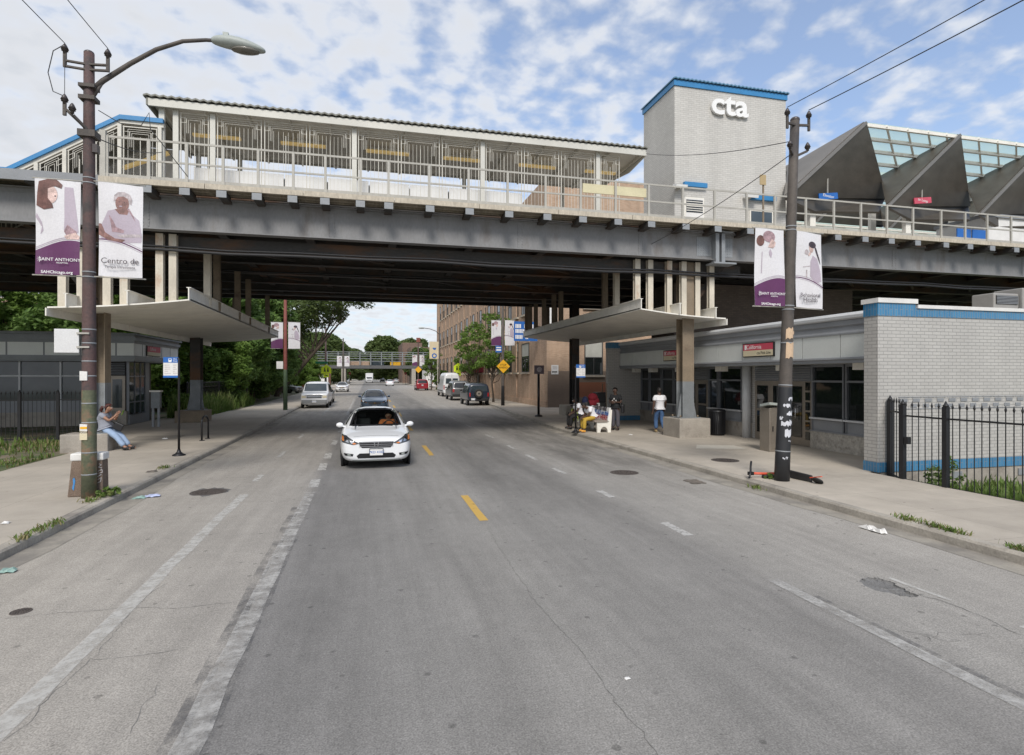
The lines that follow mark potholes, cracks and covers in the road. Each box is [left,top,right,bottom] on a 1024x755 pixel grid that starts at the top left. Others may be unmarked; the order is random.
crack [490,532,658,755]
manhole cover [9,607,33,616]
manhole cover [189,488,227,496]
pothole [857,577,921,597]
crack [901,597,1024,641]
